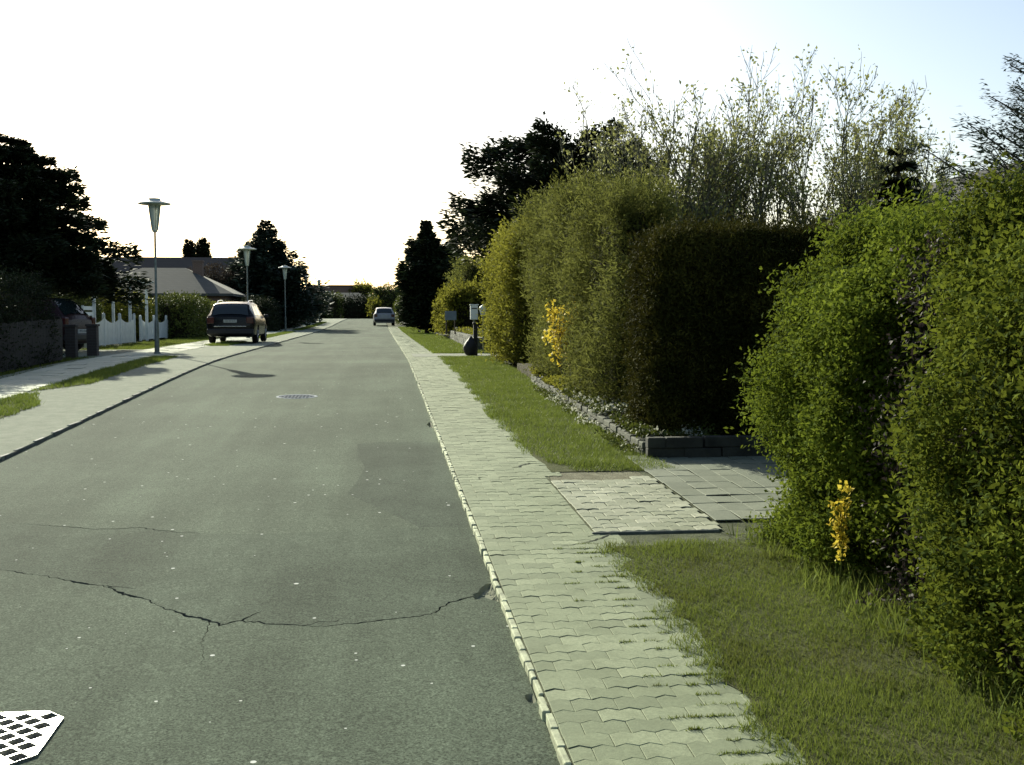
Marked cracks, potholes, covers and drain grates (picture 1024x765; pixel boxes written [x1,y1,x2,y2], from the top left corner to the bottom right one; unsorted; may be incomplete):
crack [0,569,473,665]
